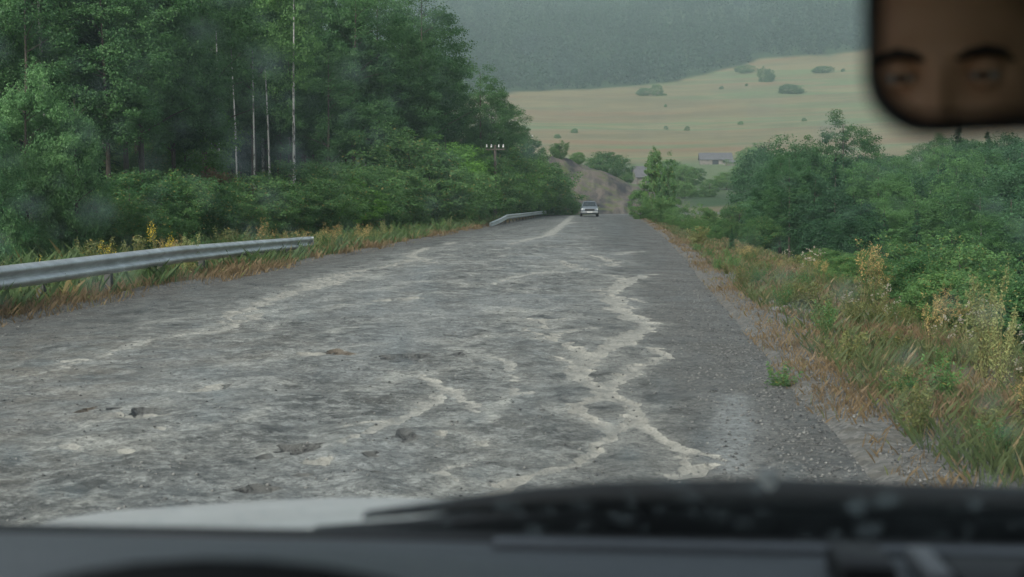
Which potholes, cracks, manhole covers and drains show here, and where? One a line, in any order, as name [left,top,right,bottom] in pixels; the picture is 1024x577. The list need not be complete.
pothole [273,442,326,455]
pothole [124,407,161,418]
pothole [232,483,281,494]
crack [7,247,438,379]
pothole [391,427,420,443]
crack [333,251,728,493]
